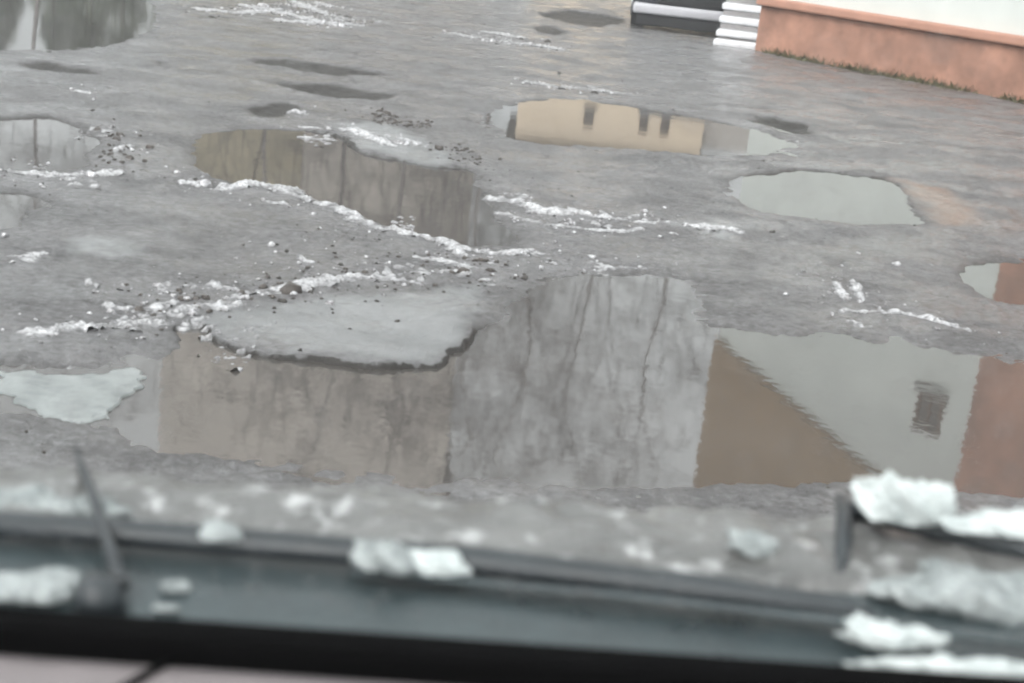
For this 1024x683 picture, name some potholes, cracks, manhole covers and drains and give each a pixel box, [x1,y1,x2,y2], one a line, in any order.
pothole [0,185,70,238]
pothole [534,8,631,28]
pothole [240,56,398,77]
pothole [477,95,801,159]
pothole [257,78,406,101]
pothole [929,251,1024,308]
pothole [0,0,169,53]
pothole [0,111,123,174]
pothole [742,113,825,136]
pothole [171,125,547,250]
pothole [0,267,1024,509]
pothole [713,166,943,229]
